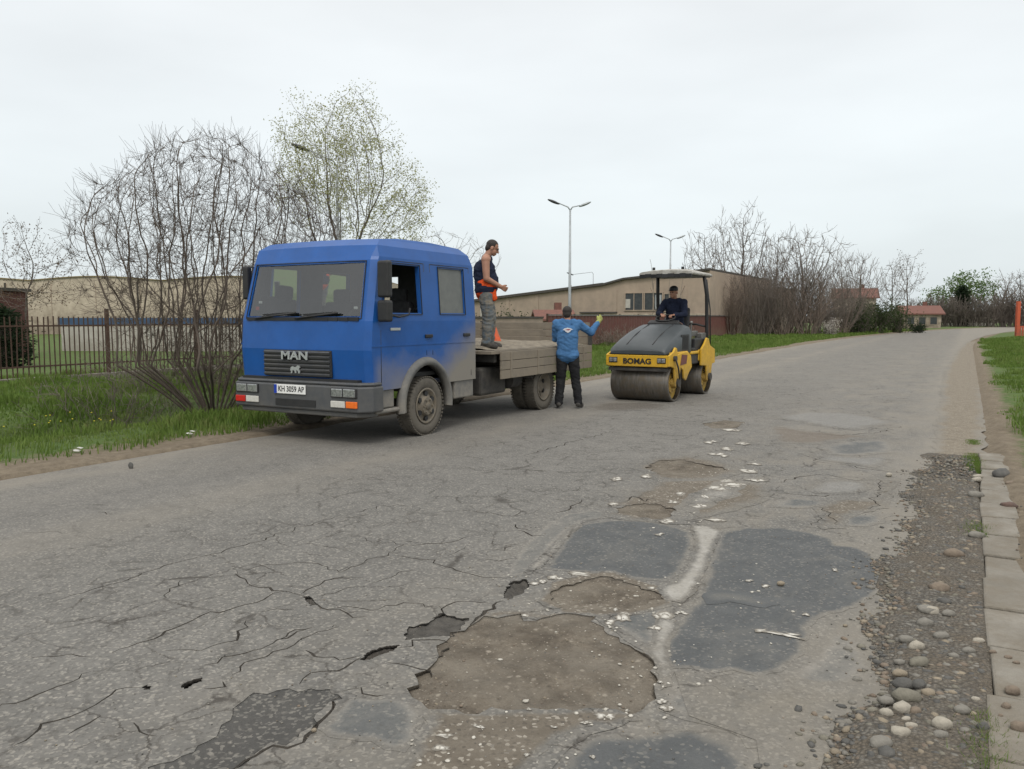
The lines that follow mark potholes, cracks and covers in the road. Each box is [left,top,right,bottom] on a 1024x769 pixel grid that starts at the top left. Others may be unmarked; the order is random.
pothole [645,460,725,477]
pothole [407,613,658,714]
crack [0,654,154,745]
crack [114,511,539,769]
pothole [504,579,530,599]
pothole [617,503,676,519]
pothole [550,577,663,608]
